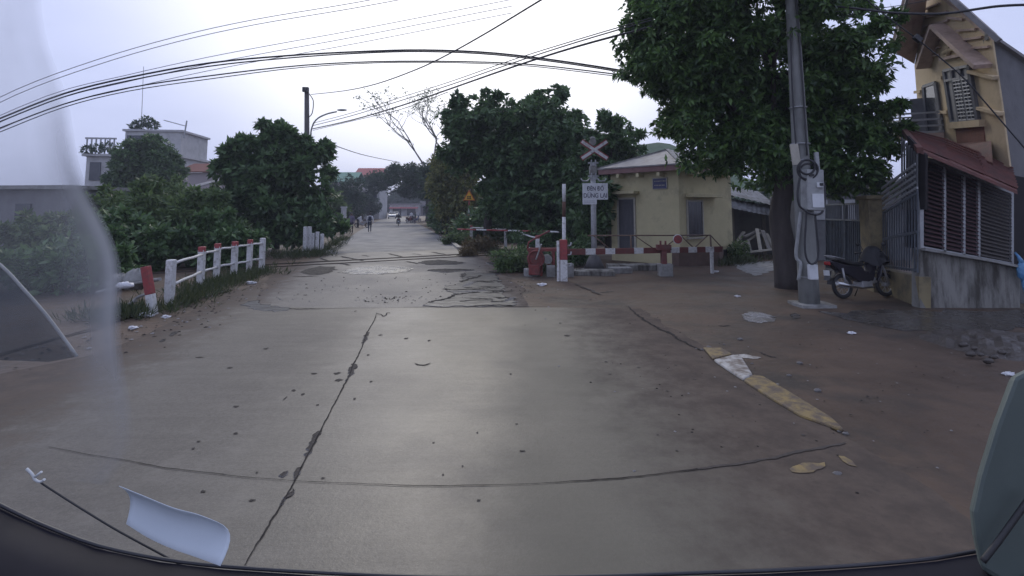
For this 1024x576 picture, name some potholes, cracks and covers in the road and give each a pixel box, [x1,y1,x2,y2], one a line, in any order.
crack [628,306,700,350]
